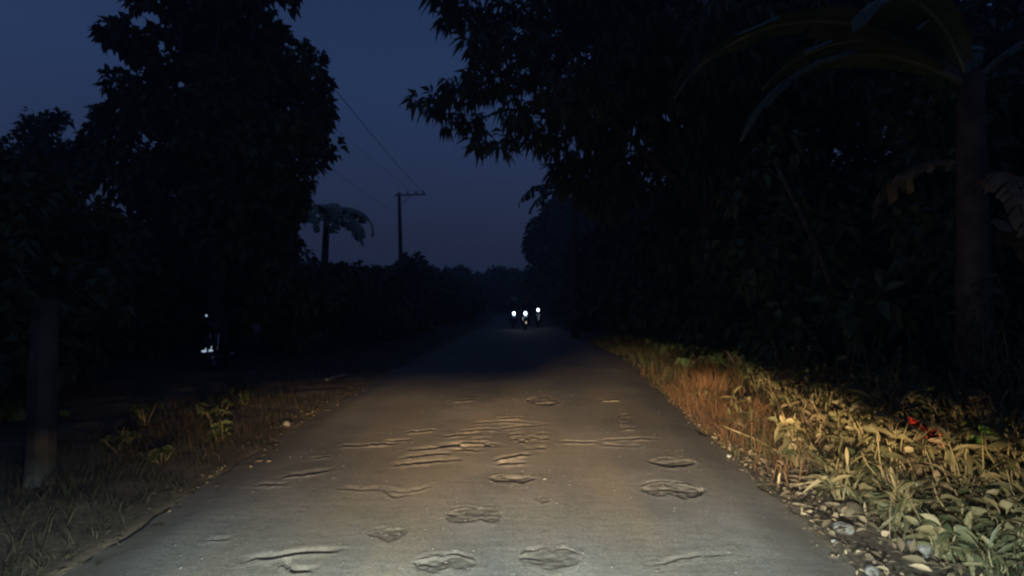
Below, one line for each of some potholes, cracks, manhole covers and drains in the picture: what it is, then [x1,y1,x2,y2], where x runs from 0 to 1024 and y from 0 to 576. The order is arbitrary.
pothole [481,470,544,487]
pothole [519,394,566,407]
pothole [639,454,704,470]
pothole [507,543,593,576]
pothole [435,503,512,527]
pothole [355,522,419,547]
pothole [630,478,715,503]
pothole [398,548,489,576]
